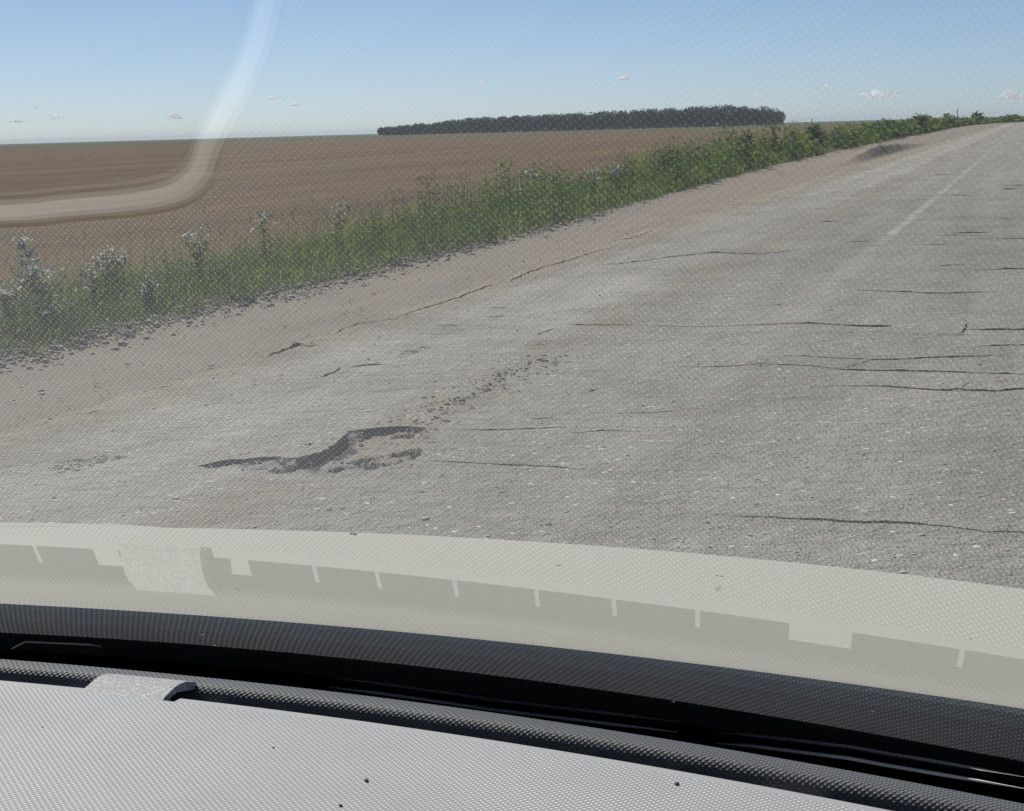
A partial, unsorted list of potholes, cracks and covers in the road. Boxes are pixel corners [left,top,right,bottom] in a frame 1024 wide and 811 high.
pothole [198,426,430,474]
crack [526,309,1024,392]
crack [259,230,801,379]
crack [428,457,586,470]
crack [914,217,1024,245]
crack [732,511,1024,533]
